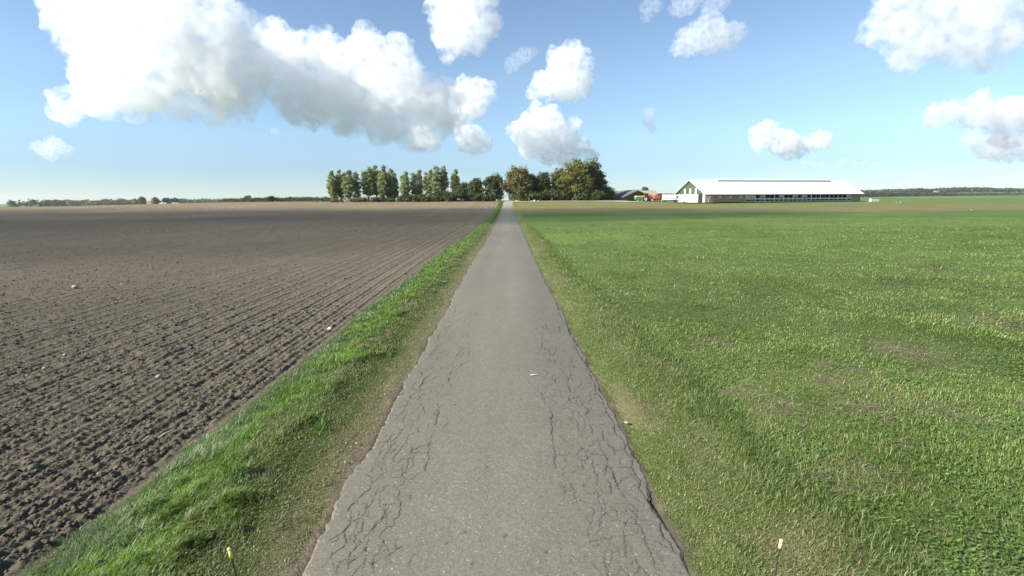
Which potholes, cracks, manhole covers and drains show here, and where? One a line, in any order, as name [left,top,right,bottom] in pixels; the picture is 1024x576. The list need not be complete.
crack [529,308,676,576]
crack [328,304,483,572]
